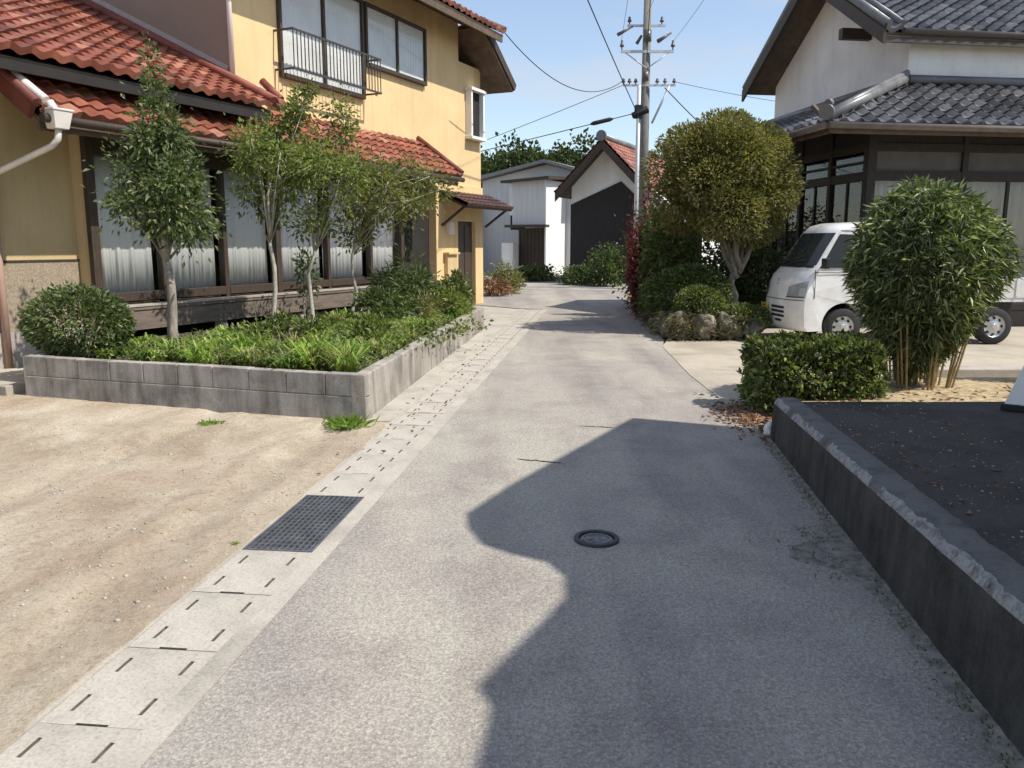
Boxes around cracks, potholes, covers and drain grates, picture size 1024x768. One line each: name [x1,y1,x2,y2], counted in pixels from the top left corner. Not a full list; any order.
drain grate [243,495,364,553]
manhole cover [574,529,619,548]
